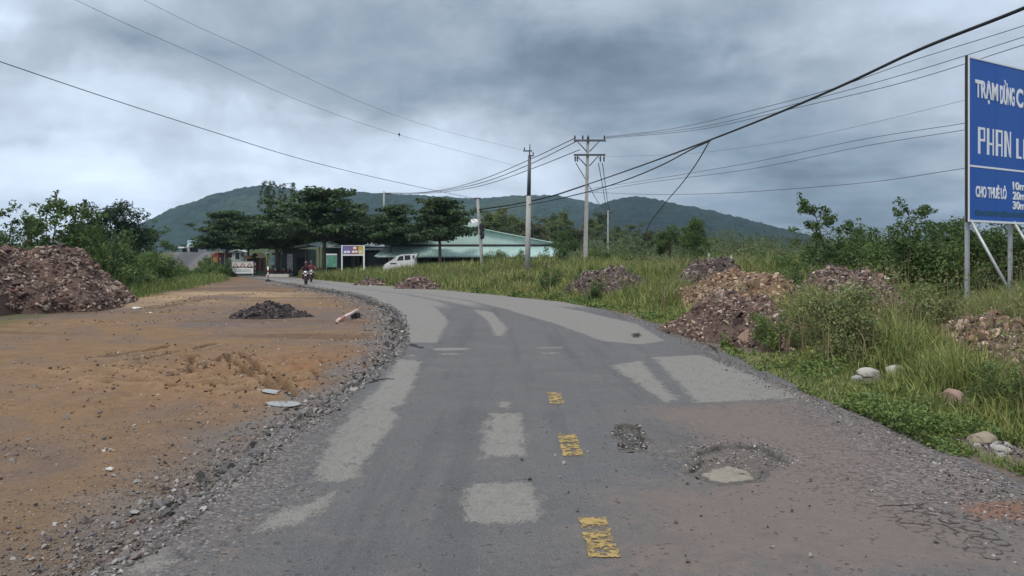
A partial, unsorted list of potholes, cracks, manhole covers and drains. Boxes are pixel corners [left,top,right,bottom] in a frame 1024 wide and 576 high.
pothole [677,441,803,486]
pothole [611,423,655,453]
crack [881,503,1014,559]
